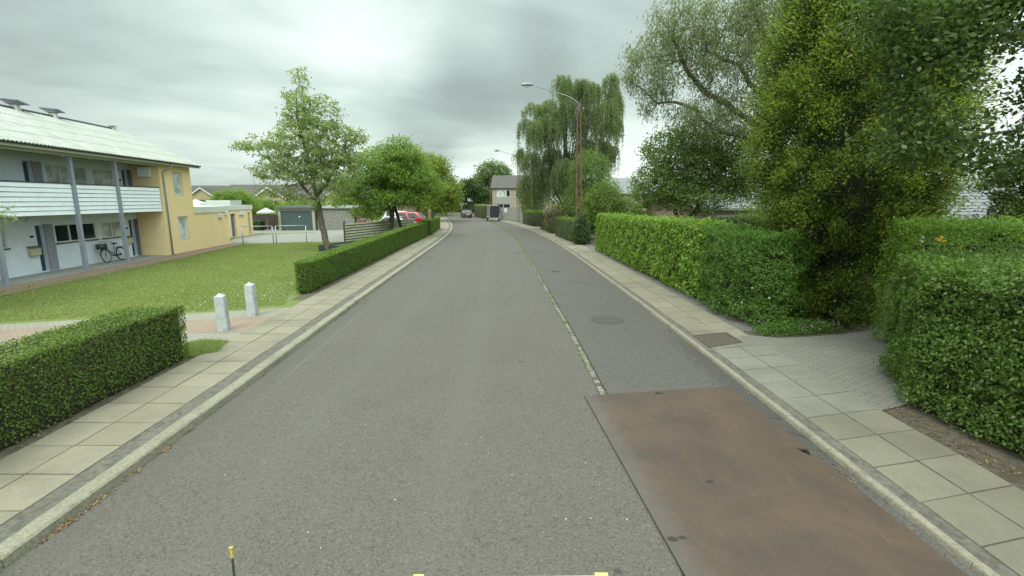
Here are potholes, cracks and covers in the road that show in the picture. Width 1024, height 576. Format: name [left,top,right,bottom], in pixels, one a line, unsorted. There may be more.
manhole cover [589,316,624,324]
